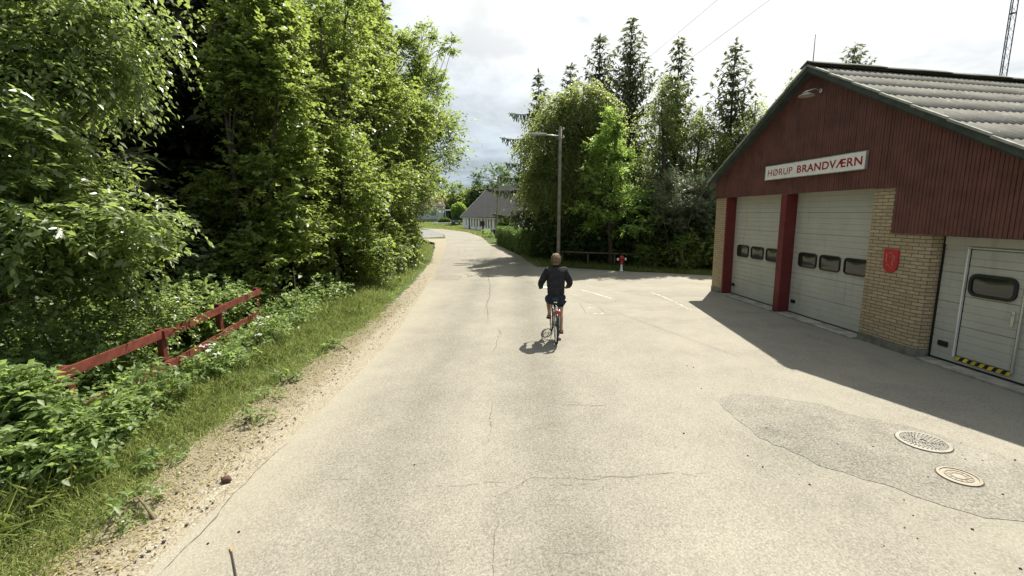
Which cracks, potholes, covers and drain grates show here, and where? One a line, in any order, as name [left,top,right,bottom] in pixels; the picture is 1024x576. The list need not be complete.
crack [157,442,289,576]
crack [429,472,710,496]
manhole cover [934,466,985,488]
